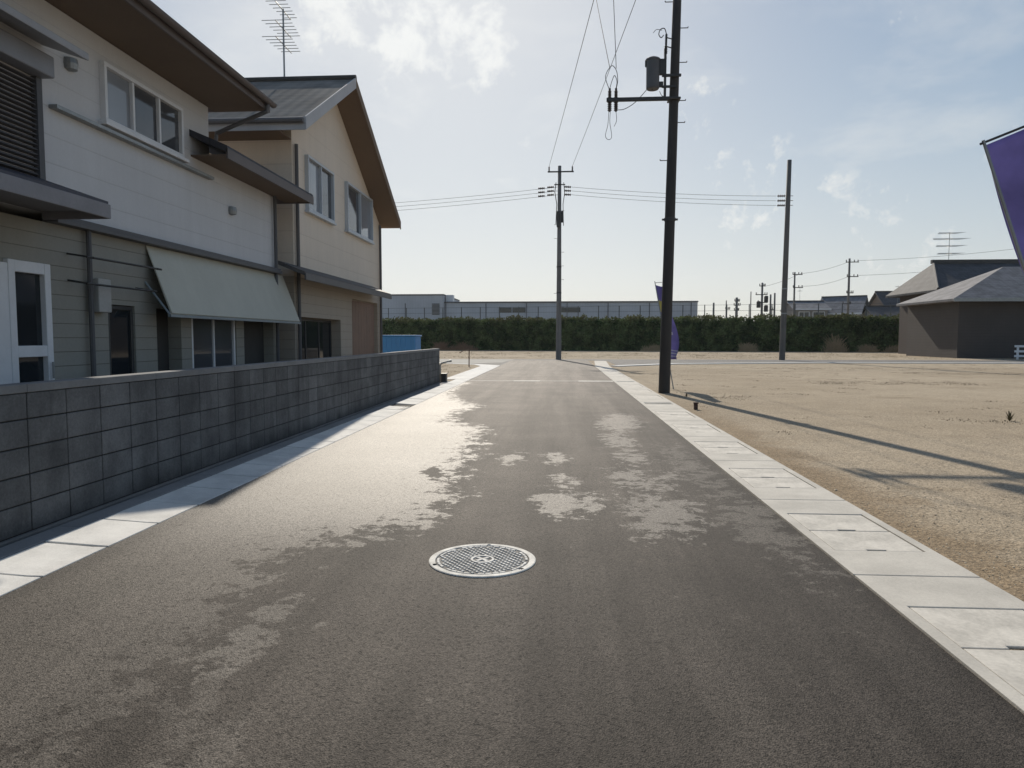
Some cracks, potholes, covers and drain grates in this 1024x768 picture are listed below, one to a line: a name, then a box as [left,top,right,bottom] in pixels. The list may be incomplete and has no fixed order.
manhole cover [429,544,536,578]
